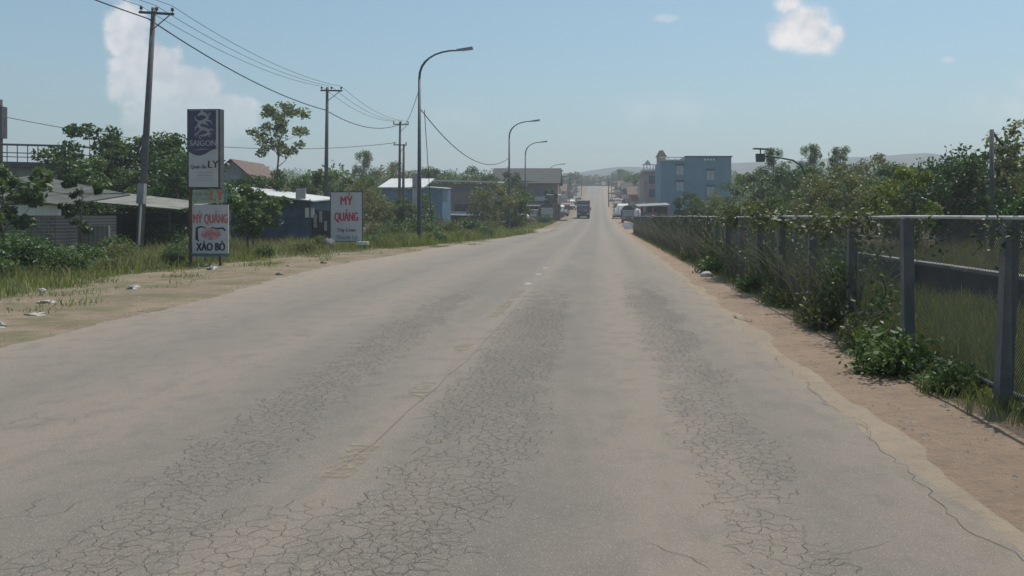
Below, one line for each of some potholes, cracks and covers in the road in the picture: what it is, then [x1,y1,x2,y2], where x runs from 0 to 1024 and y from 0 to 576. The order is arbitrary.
crack [1,284,572,576]
crack [776,356,1024,561]
crack [621,282,889,576]
